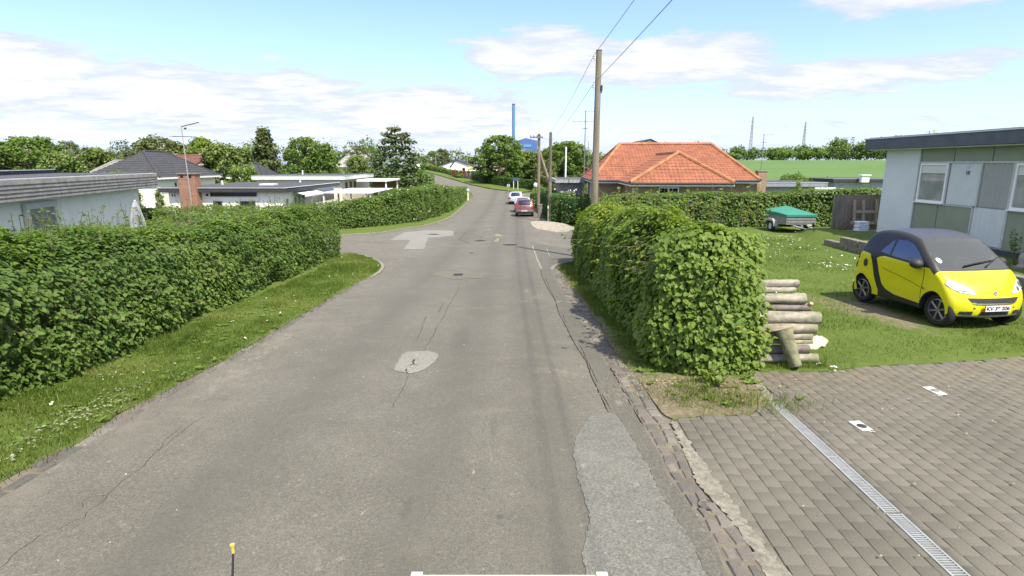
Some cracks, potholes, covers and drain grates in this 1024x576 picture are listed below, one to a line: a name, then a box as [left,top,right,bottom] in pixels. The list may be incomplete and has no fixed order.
crack [390,270,480,409]
crack [0,417,203,568]
